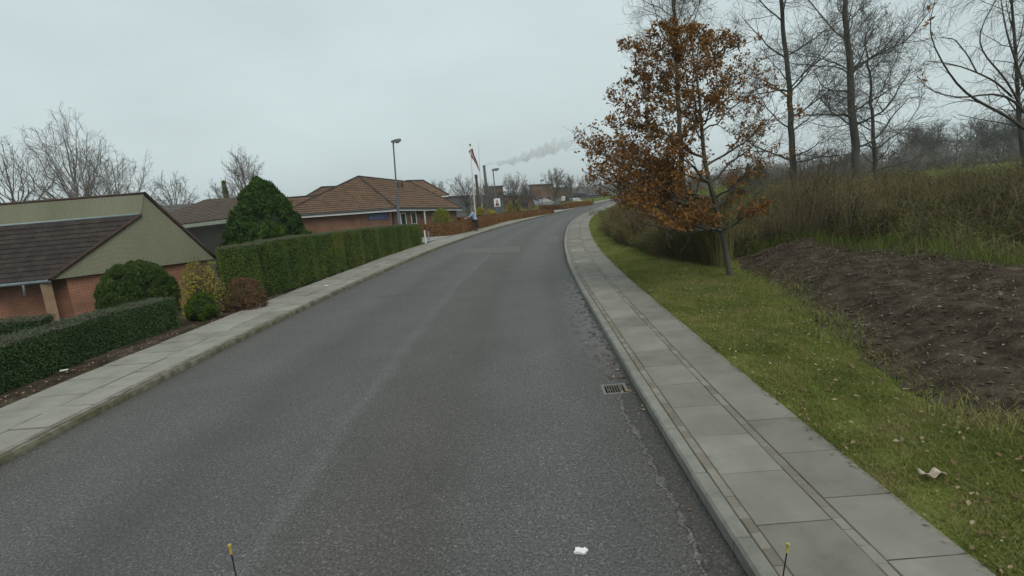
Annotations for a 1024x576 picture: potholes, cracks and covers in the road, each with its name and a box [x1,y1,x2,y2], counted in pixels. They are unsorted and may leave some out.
drain grate [601,383,629,394]
crack [615,395,709,576]
